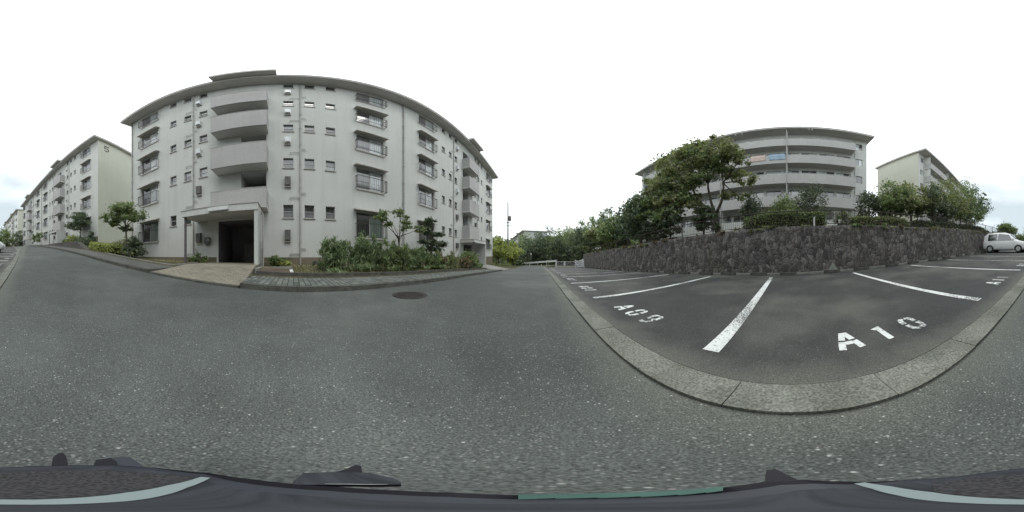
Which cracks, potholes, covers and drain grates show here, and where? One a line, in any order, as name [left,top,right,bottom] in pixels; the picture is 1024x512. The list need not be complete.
manhole cover [392,291,427,299]
